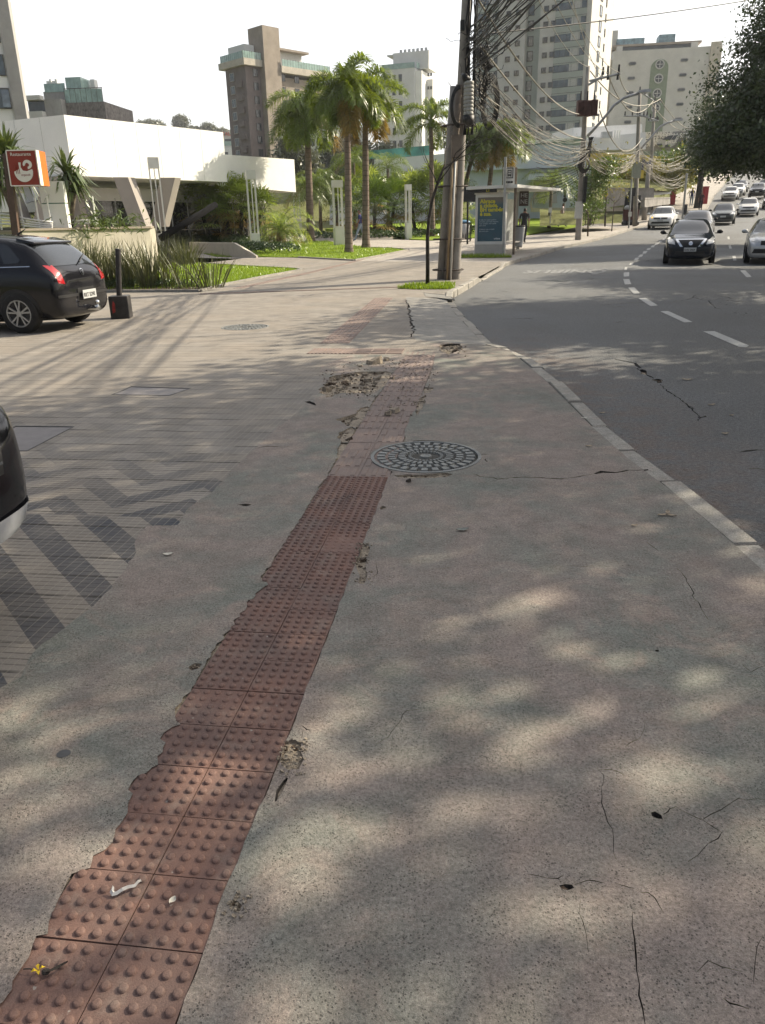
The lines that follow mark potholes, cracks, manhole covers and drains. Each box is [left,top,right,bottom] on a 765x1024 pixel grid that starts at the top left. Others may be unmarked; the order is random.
utility cover [113,386,190,396]
pothole [280,740,303,764]
crack [616,359,705,421]
pothole [439,344,461,355]
utility cover [13,425,74,451]
crack [475,454,648,479]
manhole cover [371,441,481,475]
crack [632,913,645,1023]
